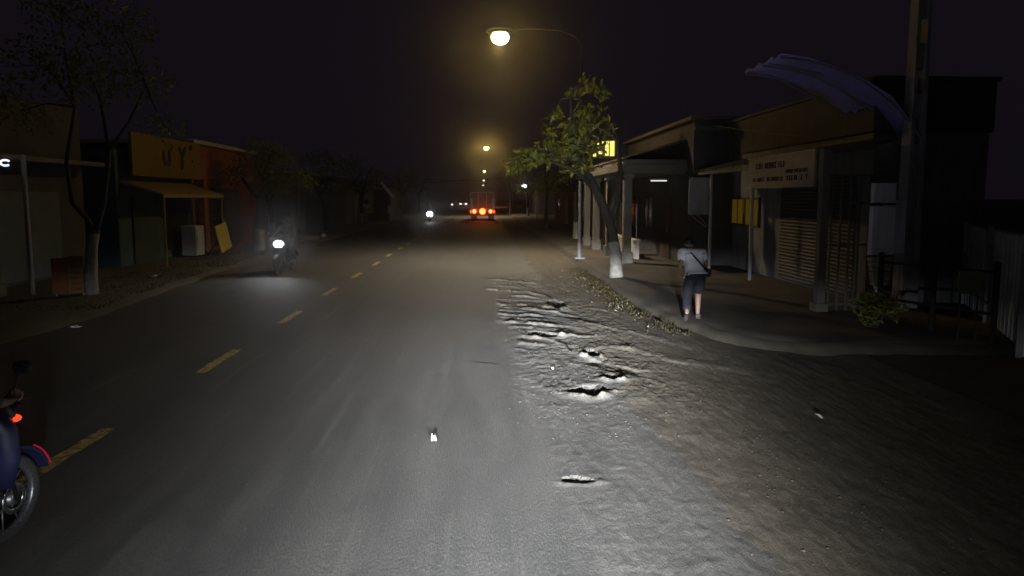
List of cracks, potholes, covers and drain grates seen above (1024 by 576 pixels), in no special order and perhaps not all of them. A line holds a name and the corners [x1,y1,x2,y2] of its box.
pothole [547,298,567,309]
pothole [560,475,595,483]
pothole [566,384,612,396]
